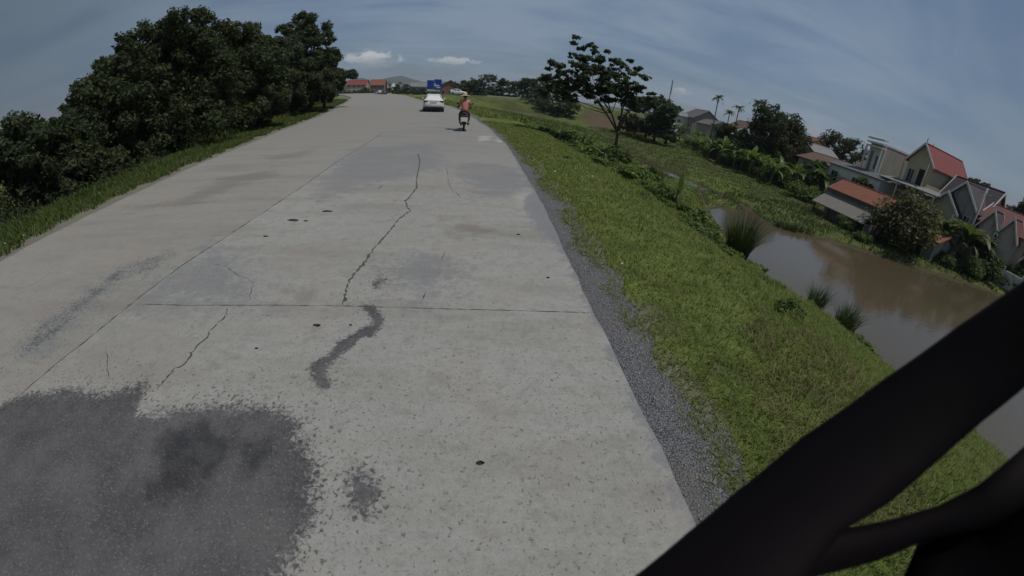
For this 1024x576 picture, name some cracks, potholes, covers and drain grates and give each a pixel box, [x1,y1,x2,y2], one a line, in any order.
crack [342,154,421,305]
crack [157,309,228,389]
